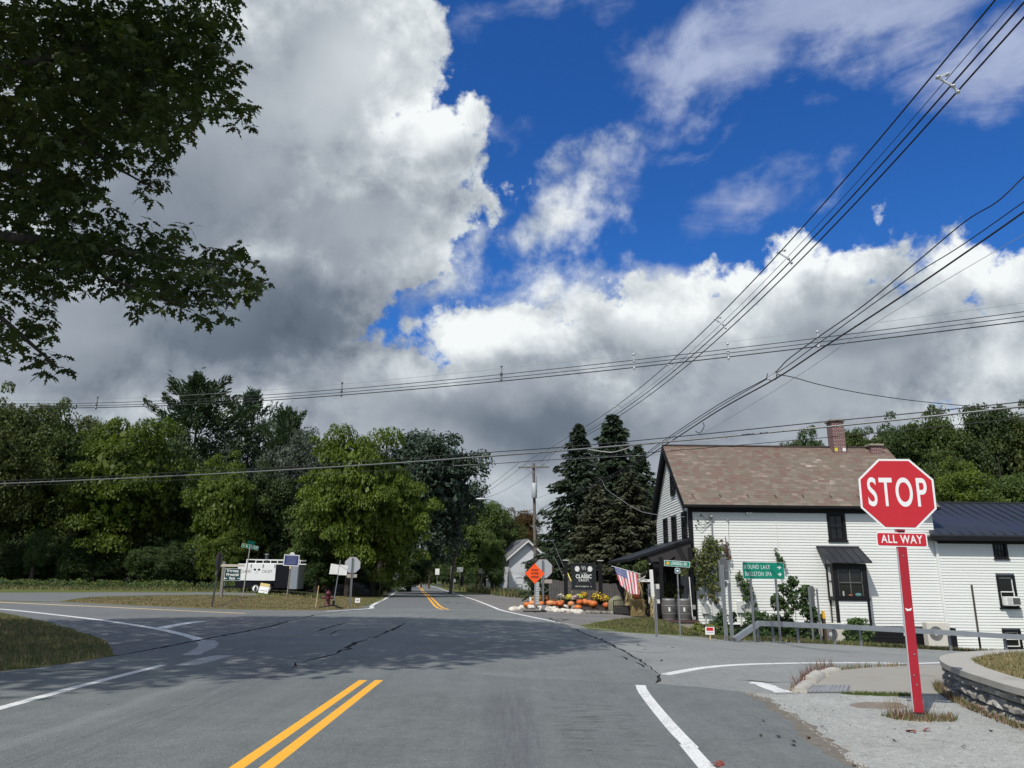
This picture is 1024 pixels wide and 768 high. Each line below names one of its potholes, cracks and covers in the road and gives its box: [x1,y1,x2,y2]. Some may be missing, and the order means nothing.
crack [286,623,405,669]
crack [545,617,675,683]
